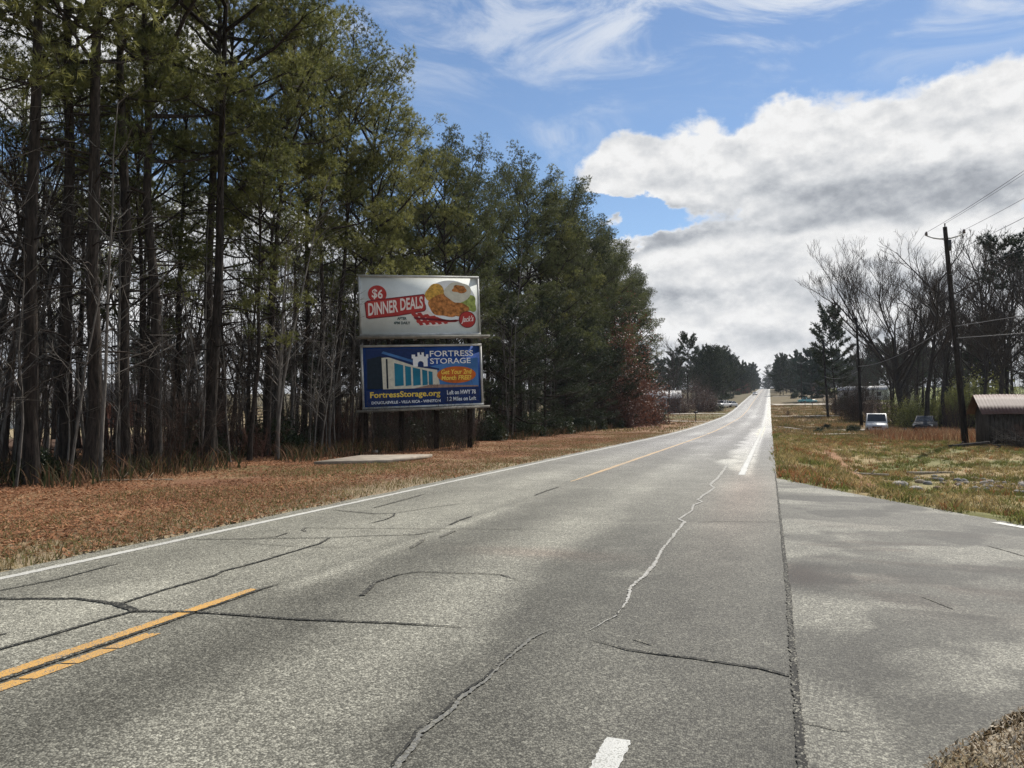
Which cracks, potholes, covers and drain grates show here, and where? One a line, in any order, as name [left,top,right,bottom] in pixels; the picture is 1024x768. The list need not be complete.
crack [588,463,790,676]
crack [0,494,548,768]
